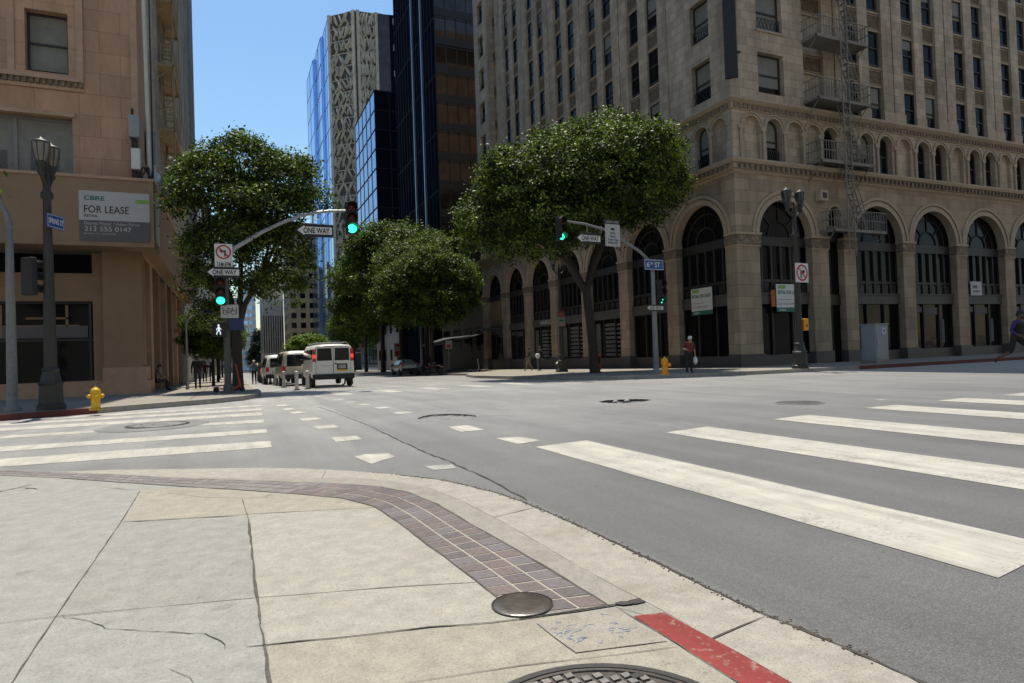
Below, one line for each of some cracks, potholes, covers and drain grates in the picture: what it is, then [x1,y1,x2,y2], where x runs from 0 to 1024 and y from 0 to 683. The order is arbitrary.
manhole cover [124,421,190,429]
utility cover [491,592,553,618]
manhole cover [508,663,700,683]
crack [63,616,225,682]
